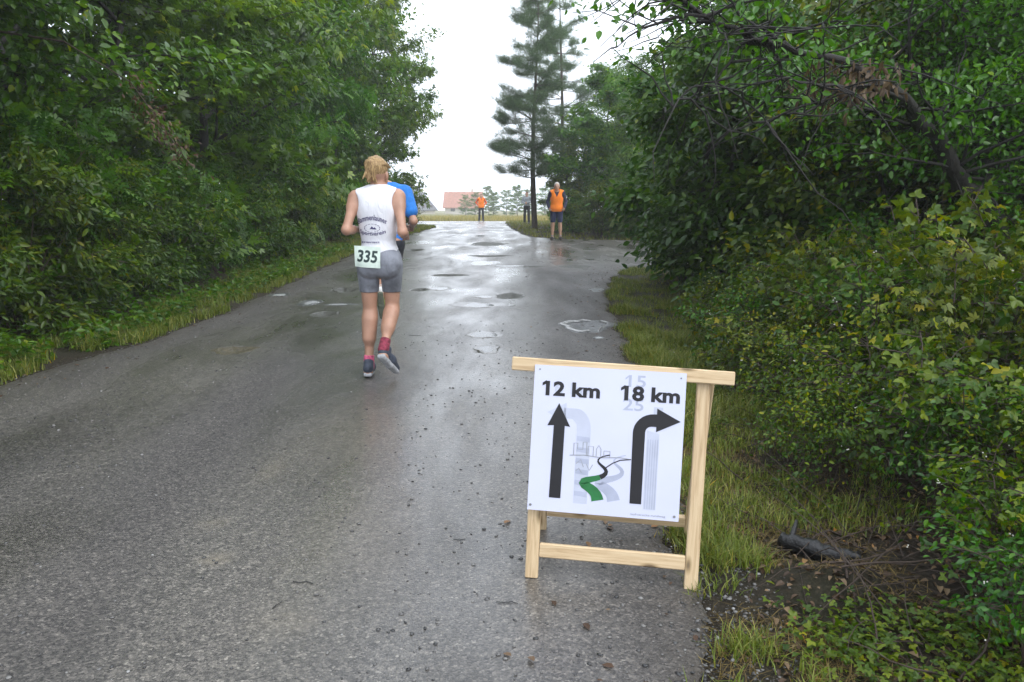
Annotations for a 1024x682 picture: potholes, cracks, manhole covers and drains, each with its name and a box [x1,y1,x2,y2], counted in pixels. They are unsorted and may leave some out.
pothole [308,310,339,318]
pothole [466,330,504,338]
pothole [558,319,617,333]
pothole [473,344,500,354]
